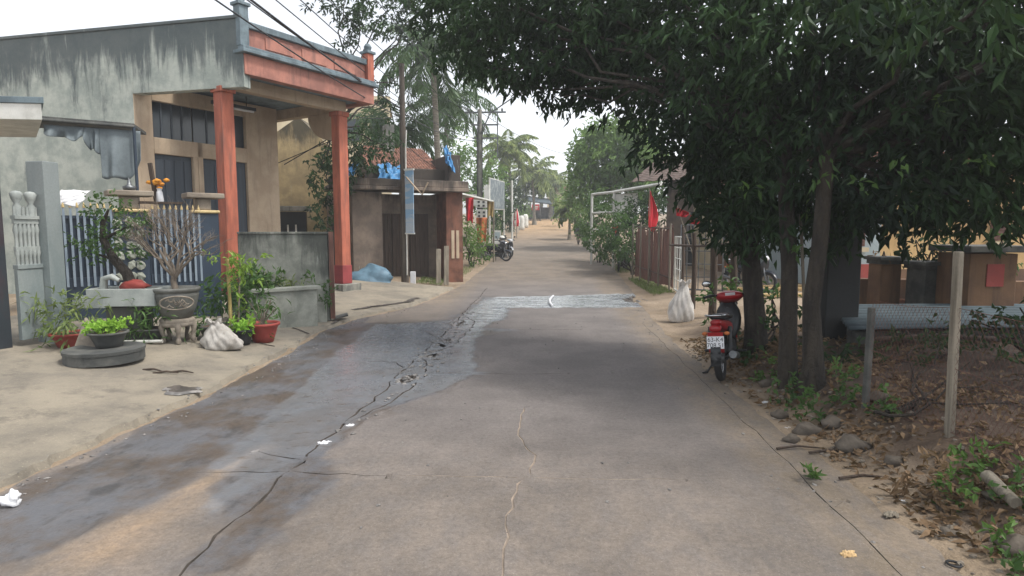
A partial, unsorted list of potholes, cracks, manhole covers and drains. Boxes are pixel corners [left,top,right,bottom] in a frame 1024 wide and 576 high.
crack [351,297,418,310]
crack [488,407,545,576]
crack [192,449,388,480]
